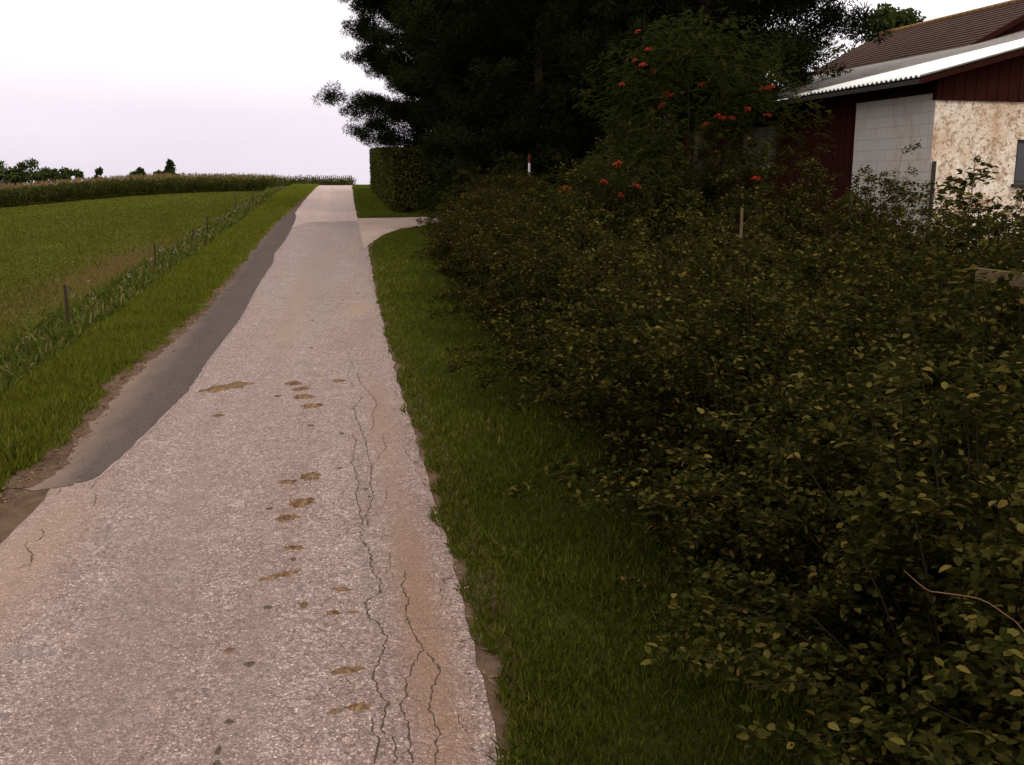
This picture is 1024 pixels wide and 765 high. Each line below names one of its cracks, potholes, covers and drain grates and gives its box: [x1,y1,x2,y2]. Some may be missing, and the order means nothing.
crack [345,358,468,765]
